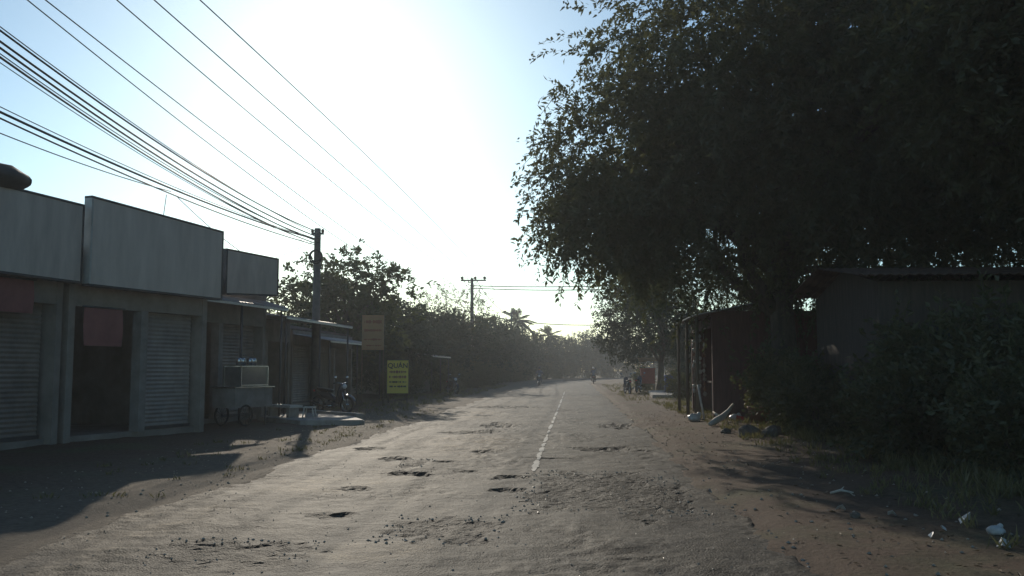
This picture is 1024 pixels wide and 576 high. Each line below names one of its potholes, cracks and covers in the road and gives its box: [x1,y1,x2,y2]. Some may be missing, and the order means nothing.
pothole [302,511,361,519]
